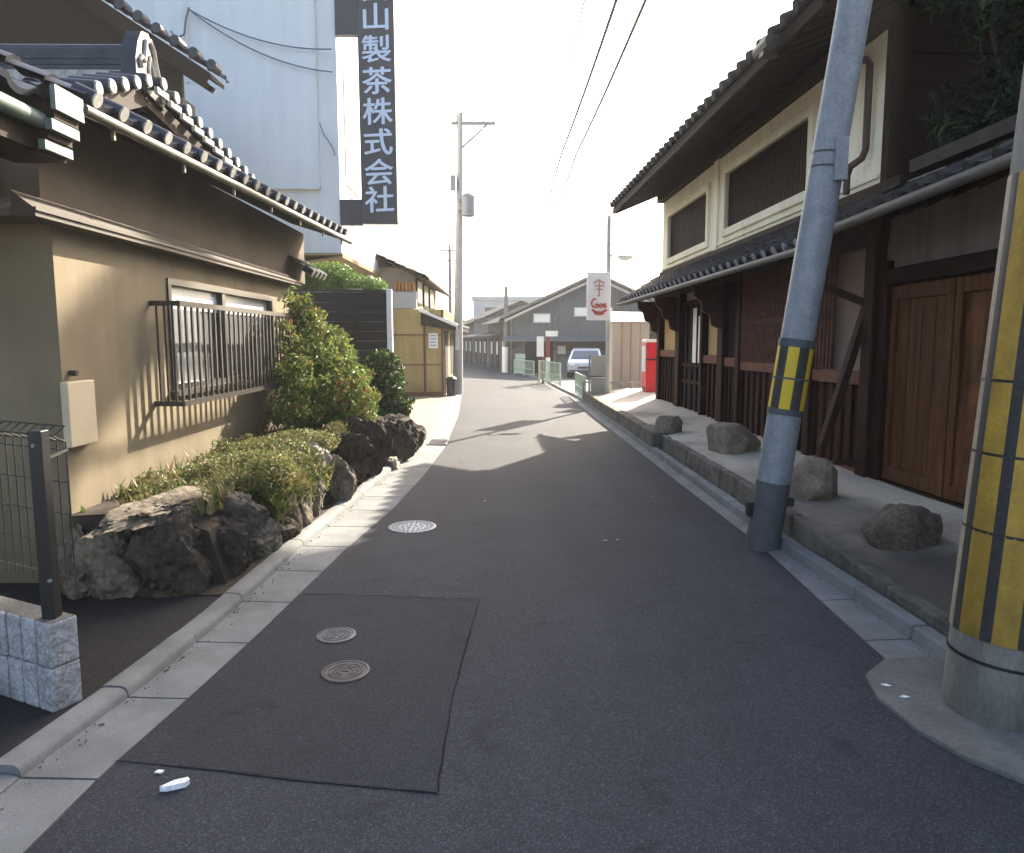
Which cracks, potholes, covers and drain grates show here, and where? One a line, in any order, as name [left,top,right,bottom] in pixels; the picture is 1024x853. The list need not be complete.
manhole cover [388,520,436,533]
manhole cover [316,627,356,644]
manhole cover [321,660,370,683]
